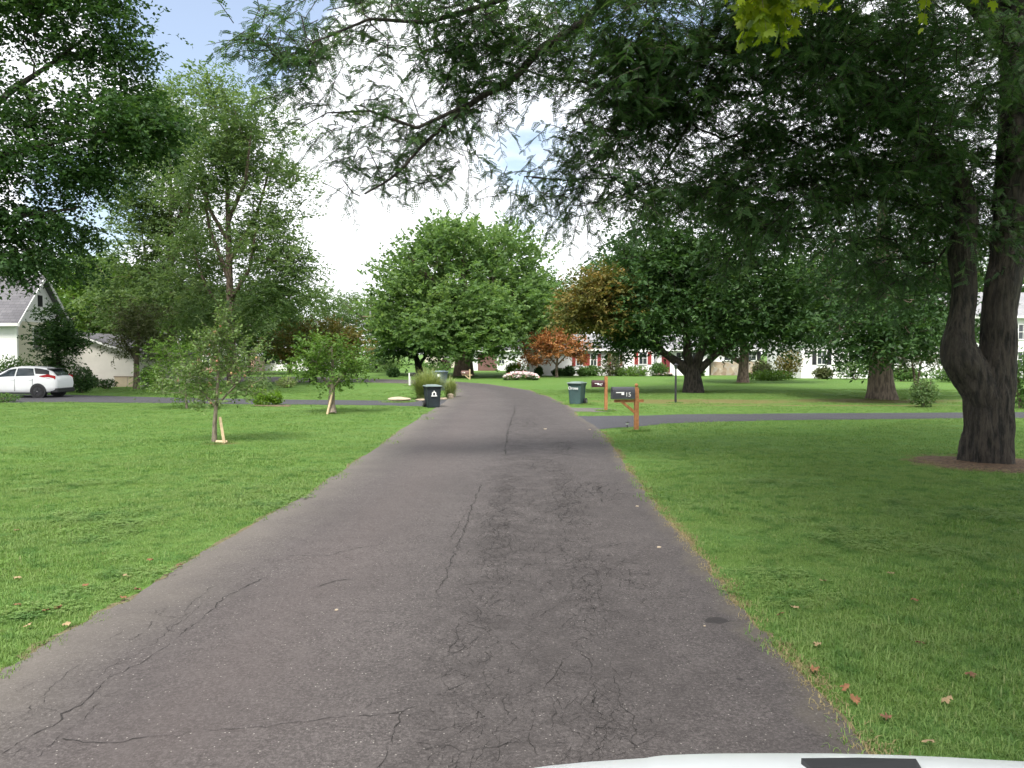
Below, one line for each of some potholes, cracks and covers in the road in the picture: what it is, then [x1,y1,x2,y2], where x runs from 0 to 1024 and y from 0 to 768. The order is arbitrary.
crack [368,406,734,768]
crack [0,568,415,768]
